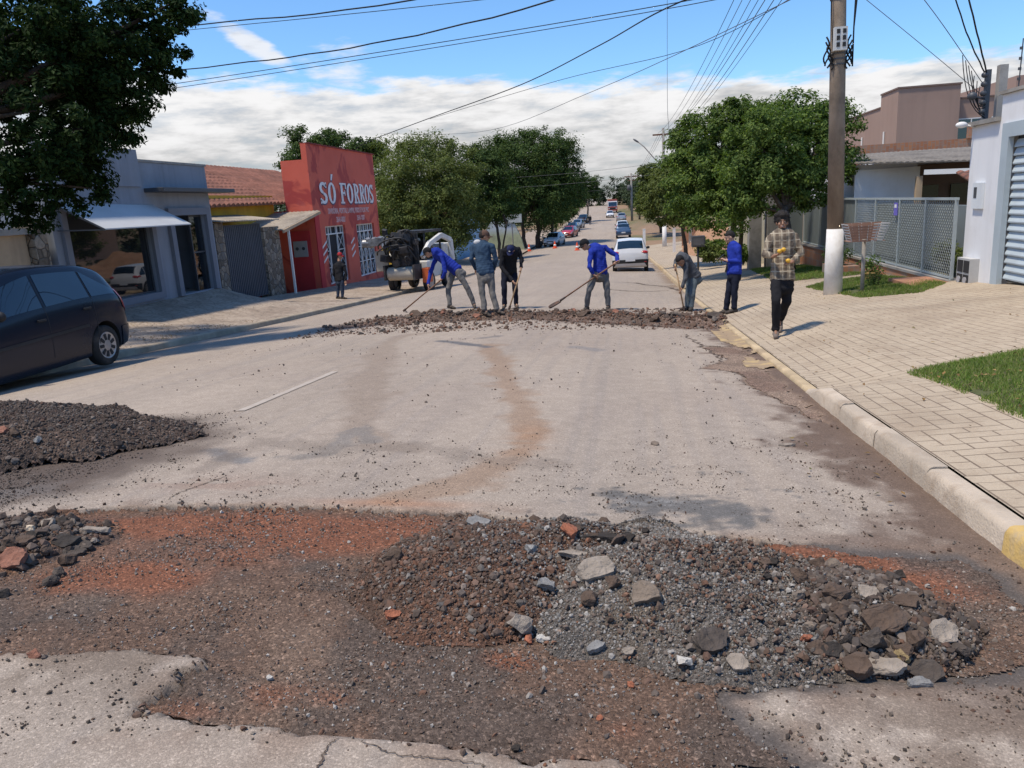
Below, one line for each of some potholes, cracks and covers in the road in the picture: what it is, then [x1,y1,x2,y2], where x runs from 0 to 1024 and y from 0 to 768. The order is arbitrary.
pothole [0,501,1024,768]
crack [316,738,338,768]
crack [361,740,486,766]
